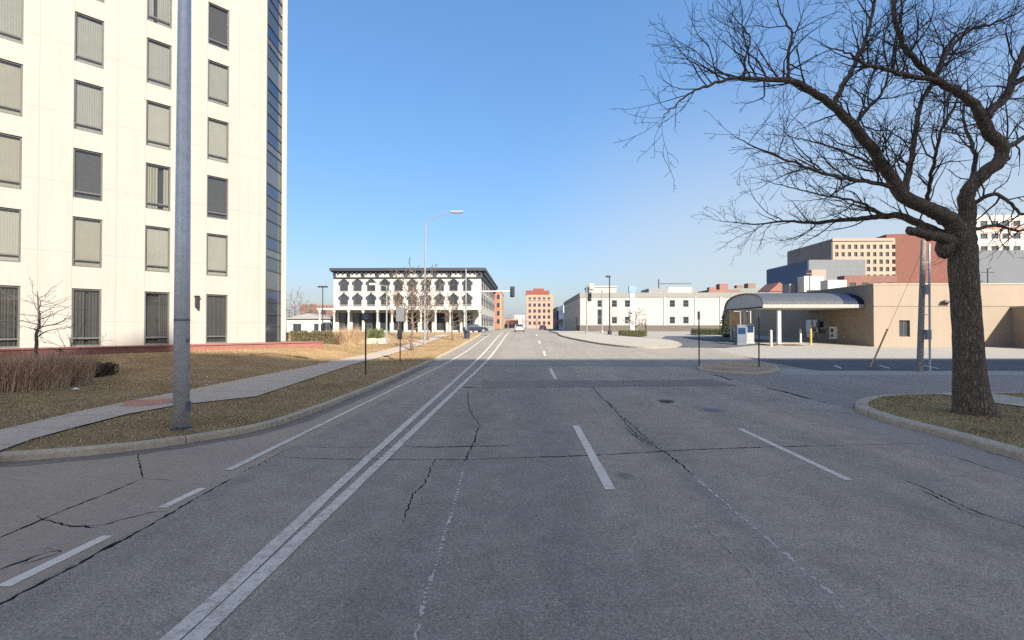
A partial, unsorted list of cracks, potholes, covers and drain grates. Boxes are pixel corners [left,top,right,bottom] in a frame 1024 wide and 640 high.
crack [879,470,1024,527]
crack [299,387,916,640]
crack [0,454,166,570]
